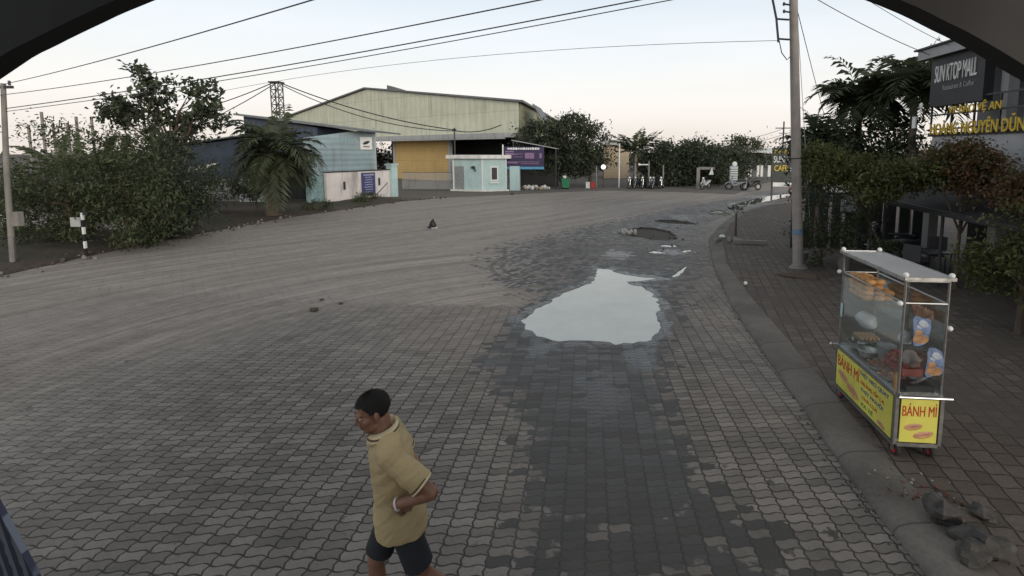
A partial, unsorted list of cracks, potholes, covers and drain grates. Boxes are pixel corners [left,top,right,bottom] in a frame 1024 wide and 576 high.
pothole [521,268,661,345]
pothole [626,227,678,241]
